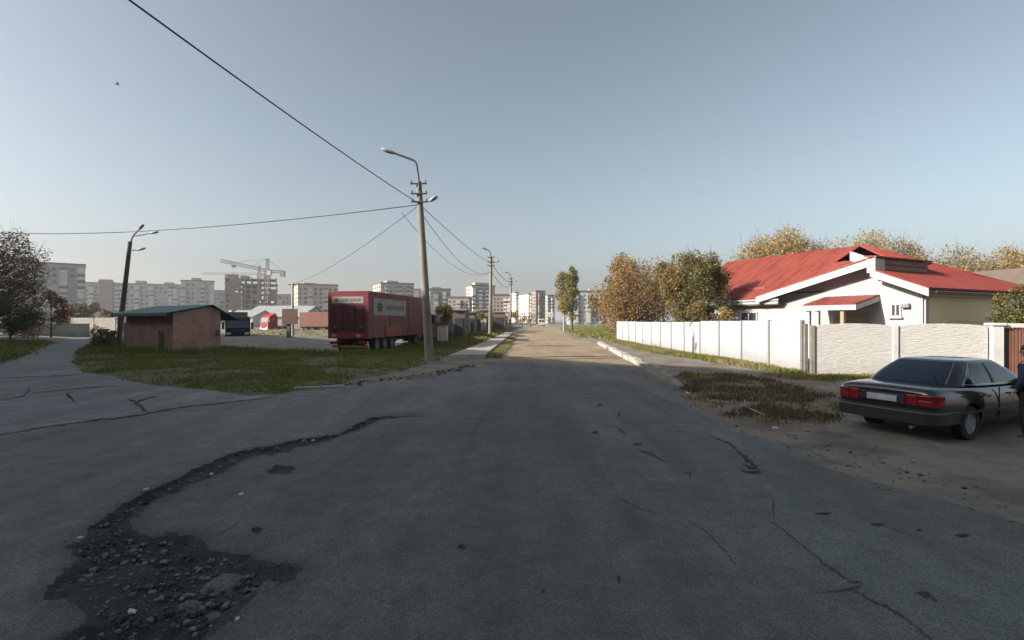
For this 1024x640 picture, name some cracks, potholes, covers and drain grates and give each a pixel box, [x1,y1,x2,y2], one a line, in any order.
crack [689,522,737,569]
crack [616,497,662,515]
pothole [43,492,303,640]
crack [772,501,938,640]
crack [147,416,408,498]
crack [0,374,158,413]
crack [616,426,761,479]
